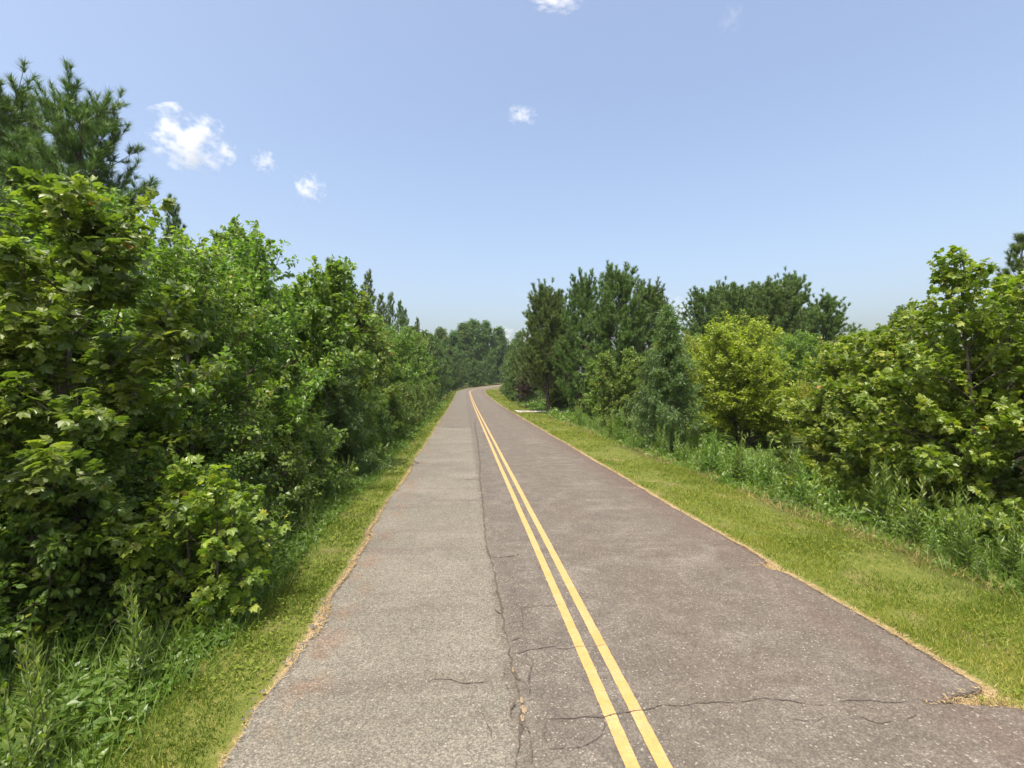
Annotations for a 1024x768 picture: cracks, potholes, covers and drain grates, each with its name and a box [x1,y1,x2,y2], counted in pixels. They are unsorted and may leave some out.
crack [432,420,960,768]
